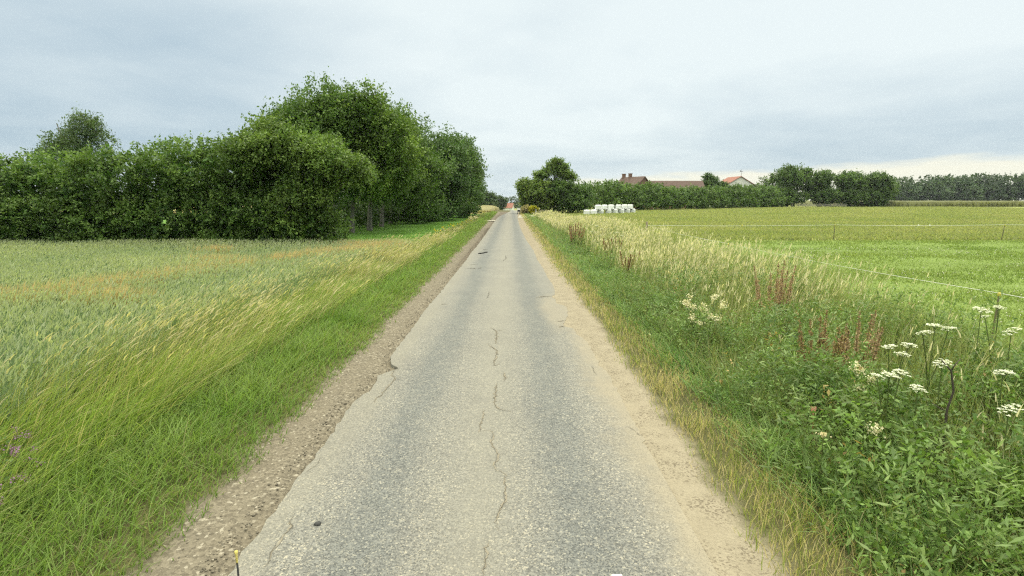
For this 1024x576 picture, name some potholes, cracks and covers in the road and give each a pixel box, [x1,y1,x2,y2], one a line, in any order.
crack [478,330,507,576]
crack [268,518,293,562]
